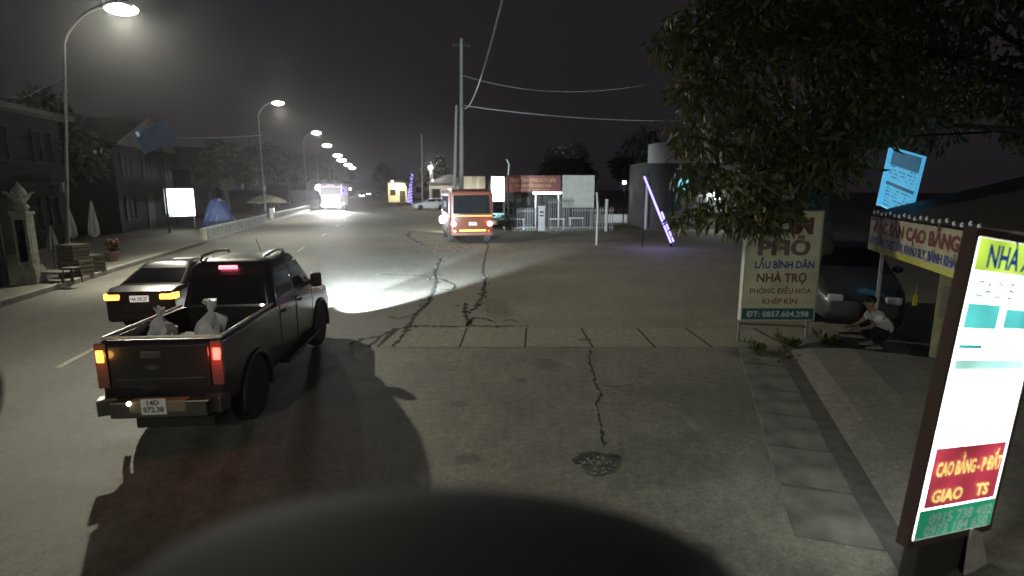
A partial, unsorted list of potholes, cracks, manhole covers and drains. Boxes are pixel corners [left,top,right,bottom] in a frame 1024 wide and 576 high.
pothole [572,451,622,477]
crack [586,349,632,446]
crack [348,232,529,347]
